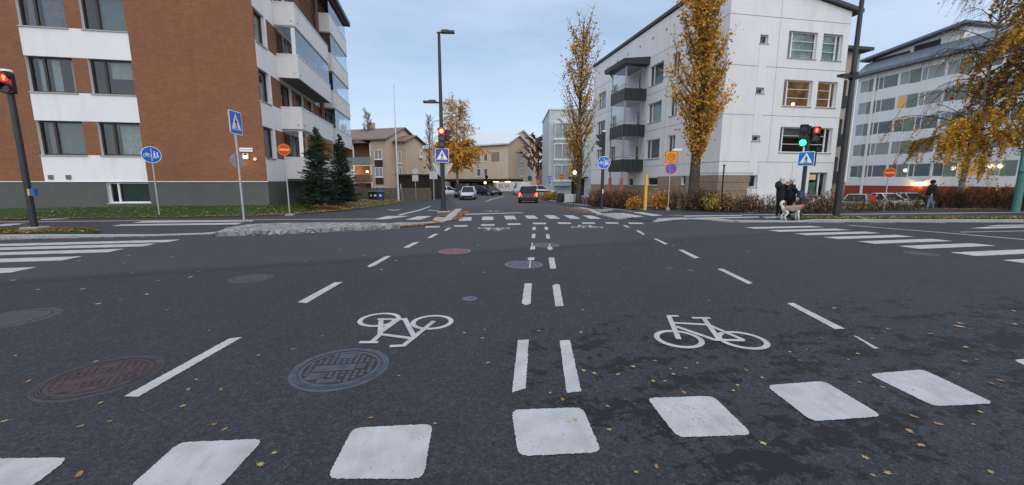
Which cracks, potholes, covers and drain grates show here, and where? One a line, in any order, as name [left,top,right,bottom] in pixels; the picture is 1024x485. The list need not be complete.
manhole cover [27,355,166,403]
manhole cover [0,308,64,328]
manhole cover [504,261,543,269]
manhole cover [288,348,390,392]
manhole cover [227,274,274,283]
